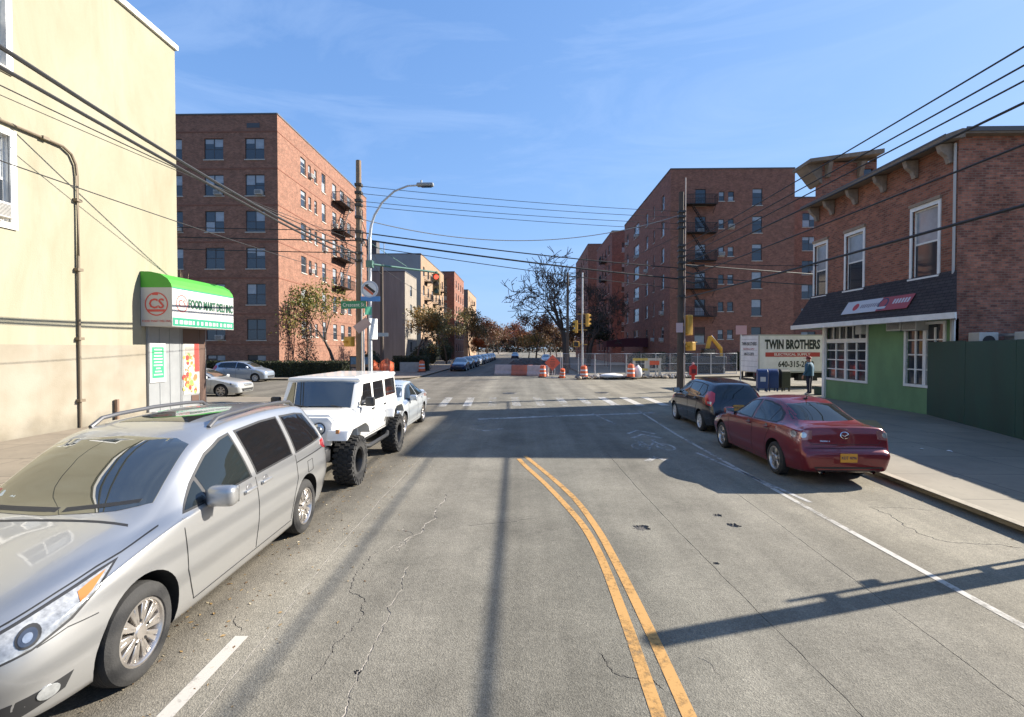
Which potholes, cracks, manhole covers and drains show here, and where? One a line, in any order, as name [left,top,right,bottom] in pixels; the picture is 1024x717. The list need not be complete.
crack [599,653,663,689]
crack [870,506,1018,548]
crack [309,493,447,717]
